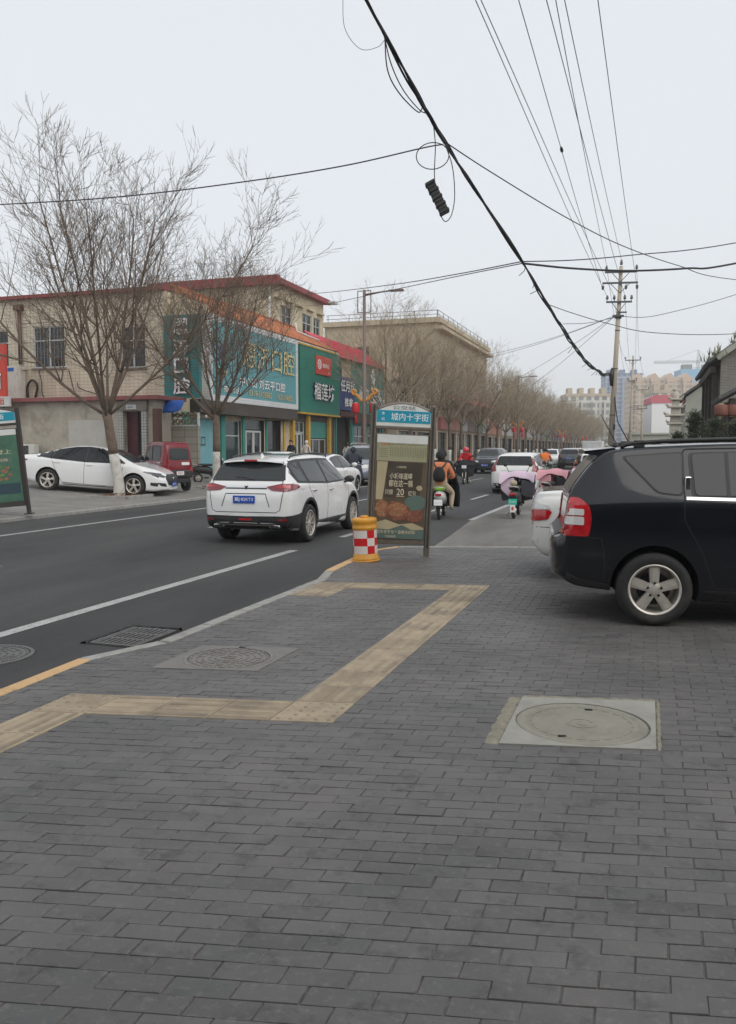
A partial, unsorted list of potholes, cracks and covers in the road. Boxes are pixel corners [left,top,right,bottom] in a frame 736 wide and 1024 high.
drain grate [81,624,182,648]
manhole cover [485,695,662,751]
manhole cover [151,645,300,671]
manhole cover [0,644,35,665]
